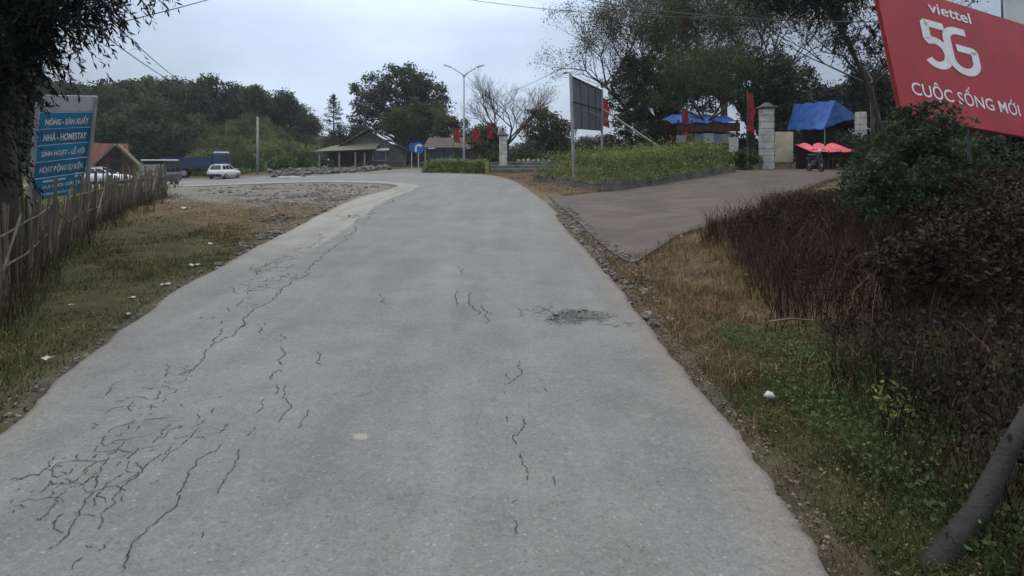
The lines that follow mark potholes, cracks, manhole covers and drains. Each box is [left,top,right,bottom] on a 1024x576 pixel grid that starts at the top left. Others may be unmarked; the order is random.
pothole [544,308,618,325]
crack [233,214,360,294]
crack [10,336,321,571]
